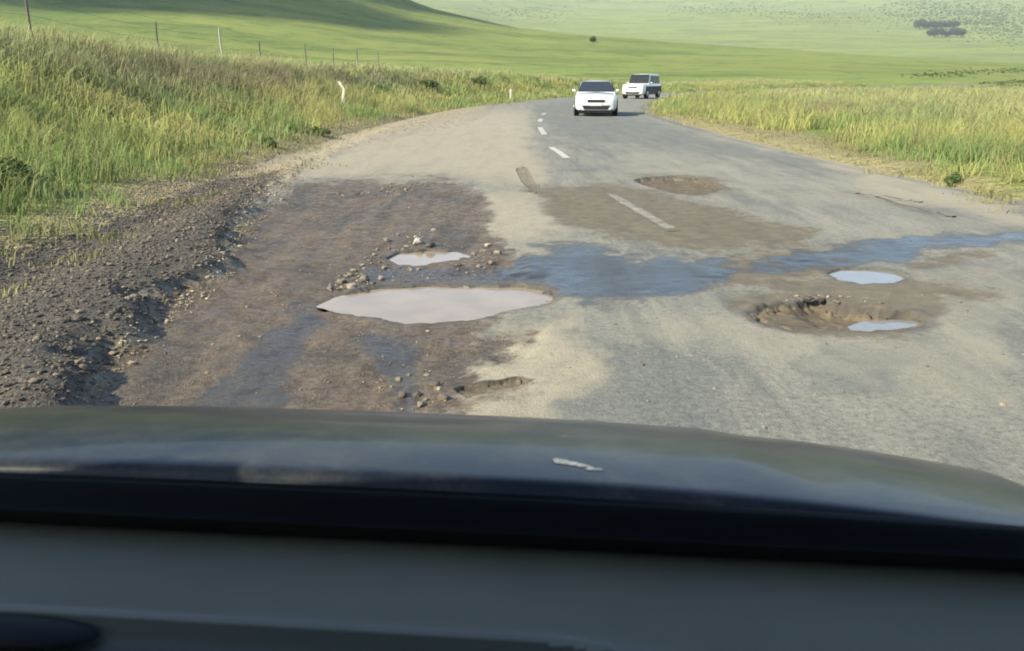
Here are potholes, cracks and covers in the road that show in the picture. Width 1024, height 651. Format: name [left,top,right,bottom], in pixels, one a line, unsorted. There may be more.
pothole [373,245,484,270]
pothole [727,295,951,338]
pothole [431,372,557,407]
crack [860,192,956,217]
pothole [627,175,731,197]
pothole [811,265,925,287]
pothole [298,281,579,329]
